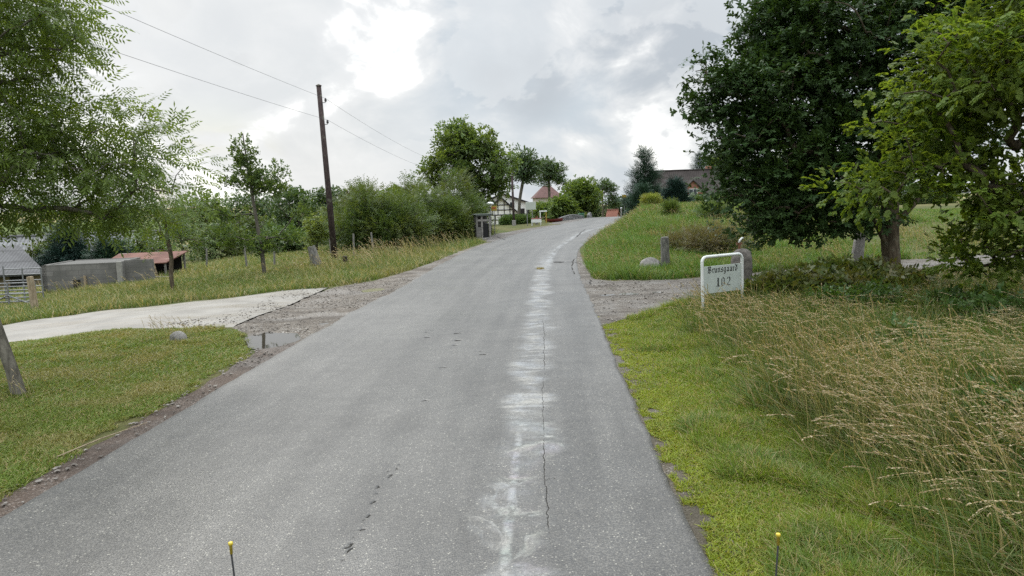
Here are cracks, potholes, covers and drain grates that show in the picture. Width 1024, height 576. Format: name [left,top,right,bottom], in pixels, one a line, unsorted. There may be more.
crack [542,323,550,538]
